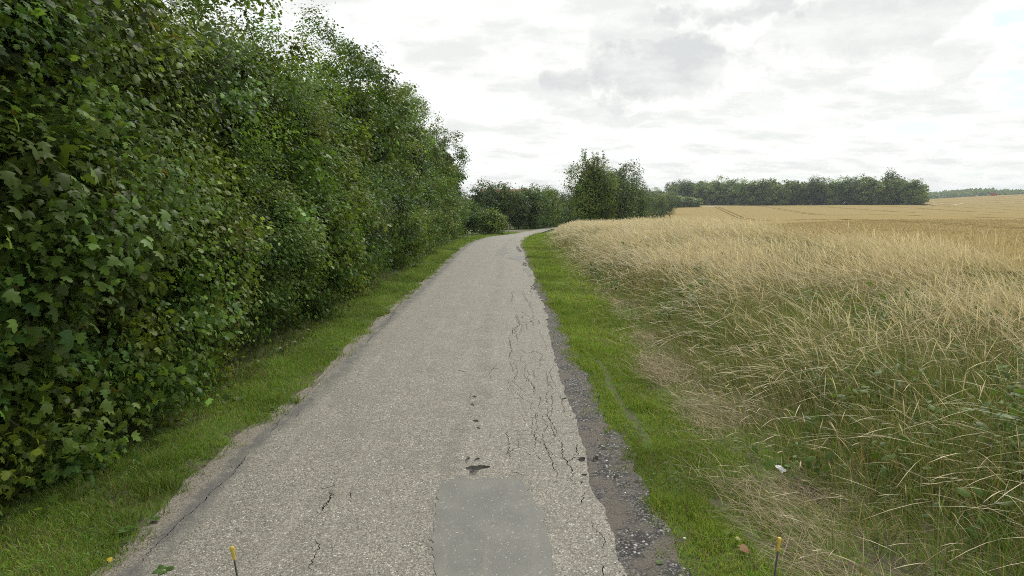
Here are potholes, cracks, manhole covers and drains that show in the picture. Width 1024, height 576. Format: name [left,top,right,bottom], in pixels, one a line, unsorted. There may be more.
pothole [466,465,490,476]
crack [490,287,577,481]
